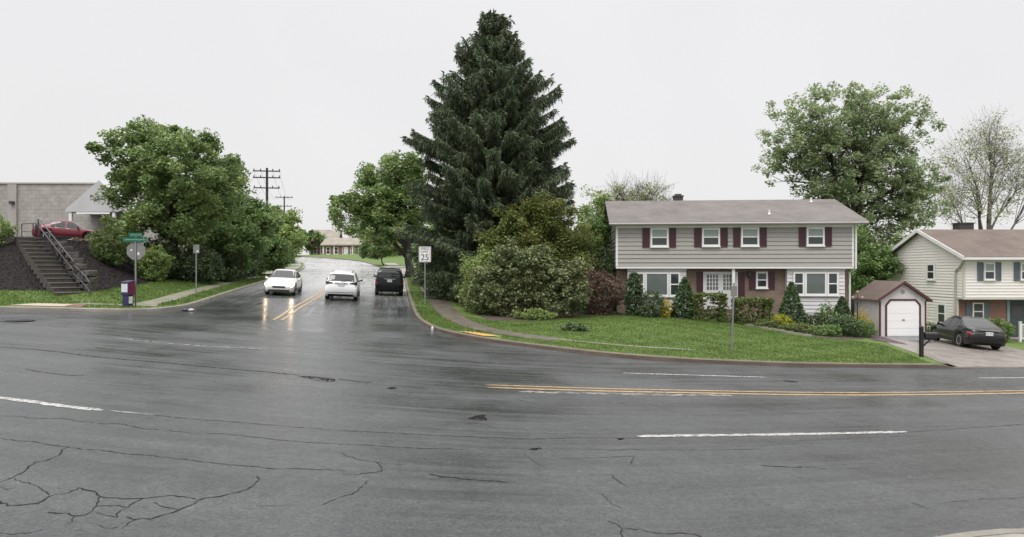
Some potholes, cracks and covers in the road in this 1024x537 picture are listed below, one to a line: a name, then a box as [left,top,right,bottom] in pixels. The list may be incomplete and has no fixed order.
crack [322,456,402,505]
crack [0,448,280,534]
crack [566,449,710,537]
